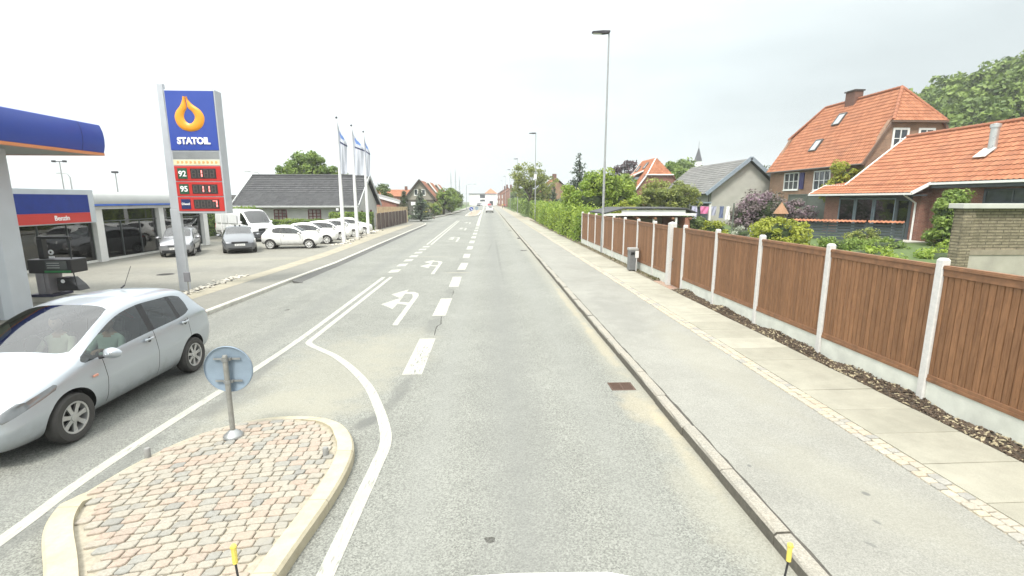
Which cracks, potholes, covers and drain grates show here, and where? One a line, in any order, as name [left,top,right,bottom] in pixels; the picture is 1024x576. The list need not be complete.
drain grate [607,382,636,391]
